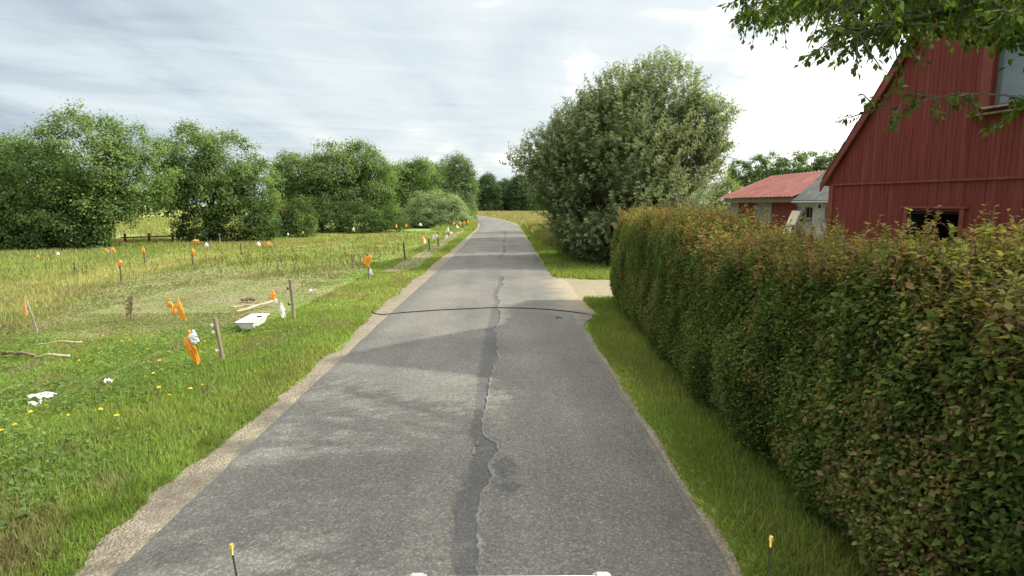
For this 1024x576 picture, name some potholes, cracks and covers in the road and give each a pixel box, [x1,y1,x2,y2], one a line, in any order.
crack [444,276,529,576]
